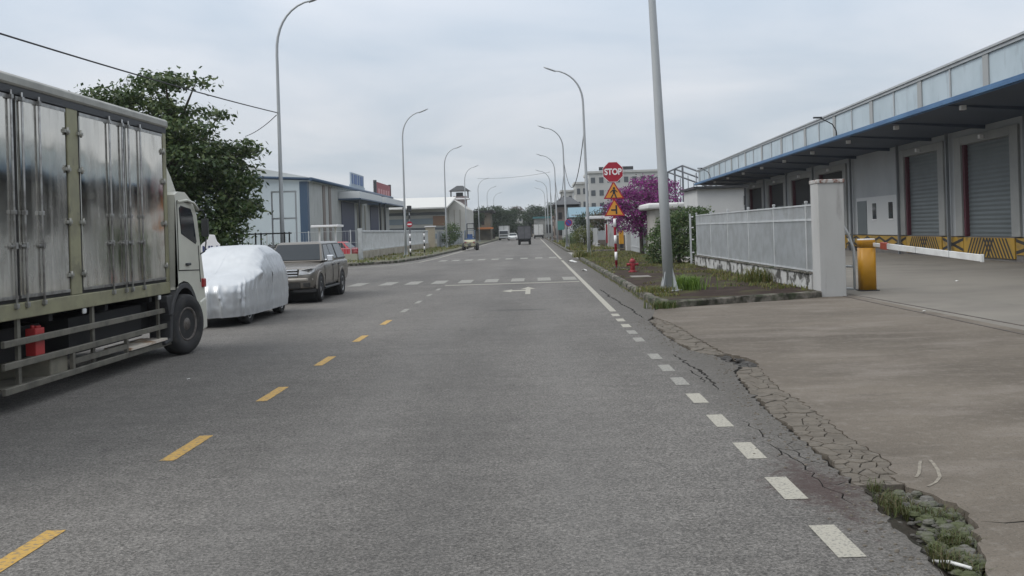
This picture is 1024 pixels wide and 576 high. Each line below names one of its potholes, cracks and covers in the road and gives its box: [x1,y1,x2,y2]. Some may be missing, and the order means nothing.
pothole [864,476,998,576]
crack [600,289,905,504]
